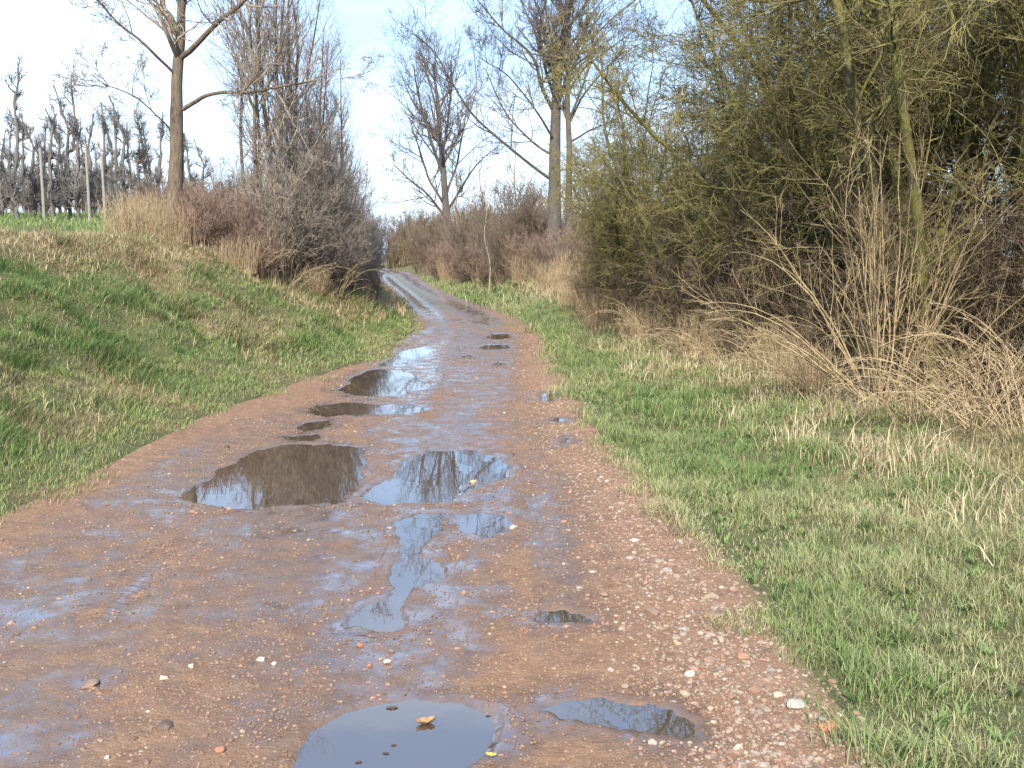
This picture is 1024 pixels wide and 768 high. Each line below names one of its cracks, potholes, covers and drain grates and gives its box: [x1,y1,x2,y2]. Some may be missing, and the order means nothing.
pothole [329,368,435,397]
pothole [344,448,523,508]
pothole [170,441,379,513]
pothole [274,689,523,768]
pothole [299,401,439,418]
pothole [480,332,518,340]
pothole [516,602,607,629]
pothole [523,686,720,748]
